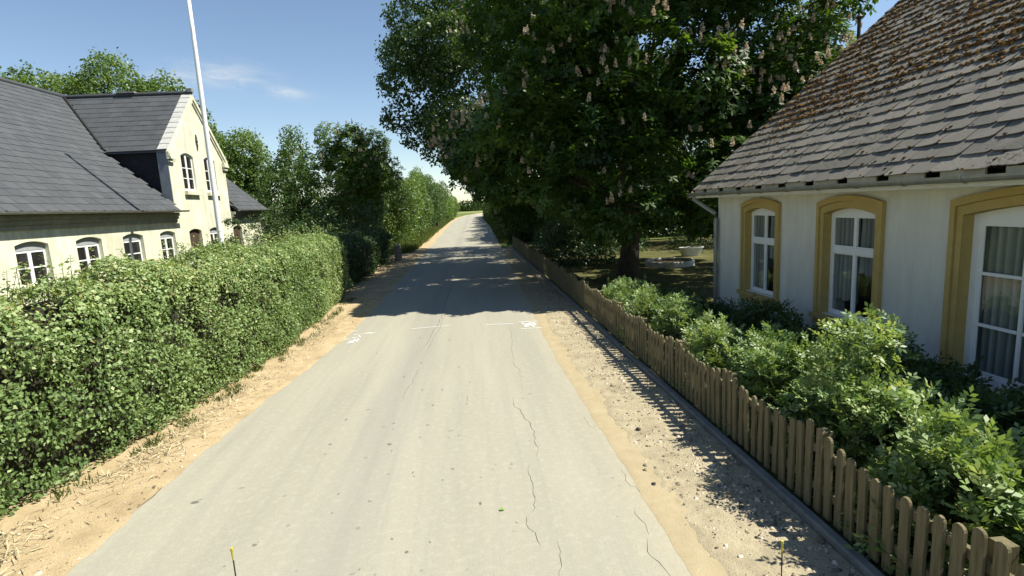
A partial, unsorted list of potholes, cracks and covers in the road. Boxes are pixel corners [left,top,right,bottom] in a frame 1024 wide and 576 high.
crack [511,340,539,543]
crack [622,471,669,574]
